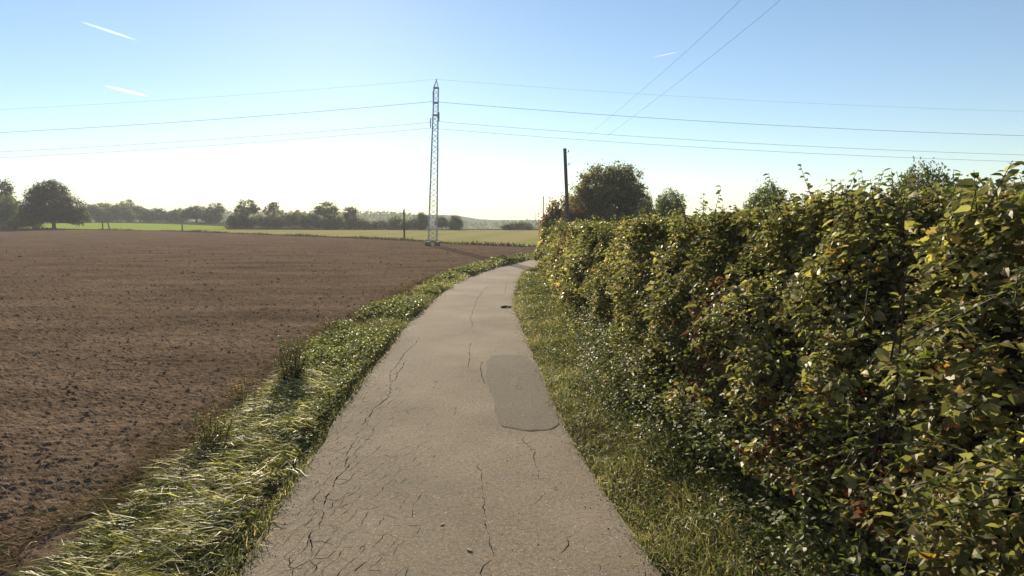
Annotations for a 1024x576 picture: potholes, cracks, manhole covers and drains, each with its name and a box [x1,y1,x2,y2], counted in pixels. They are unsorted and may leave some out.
crack [477,464,494,576]
crack [263,341,440,576]
